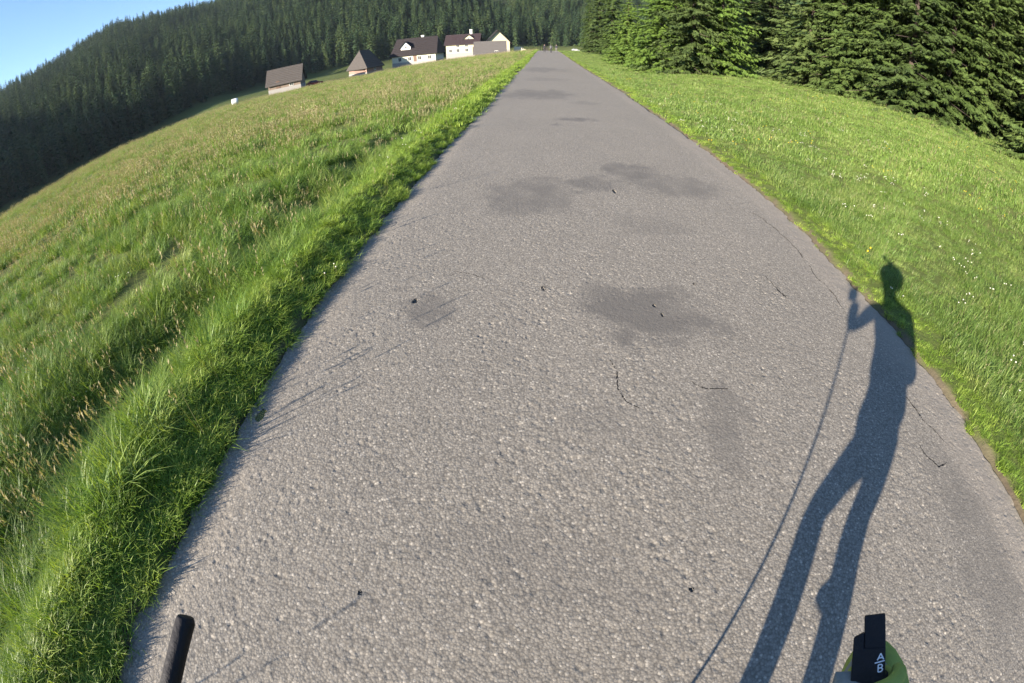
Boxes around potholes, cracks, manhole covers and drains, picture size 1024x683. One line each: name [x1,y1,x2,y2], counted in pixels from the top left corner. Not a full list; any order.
crack [754,213,842,307]
crack [907,398,946,468]
